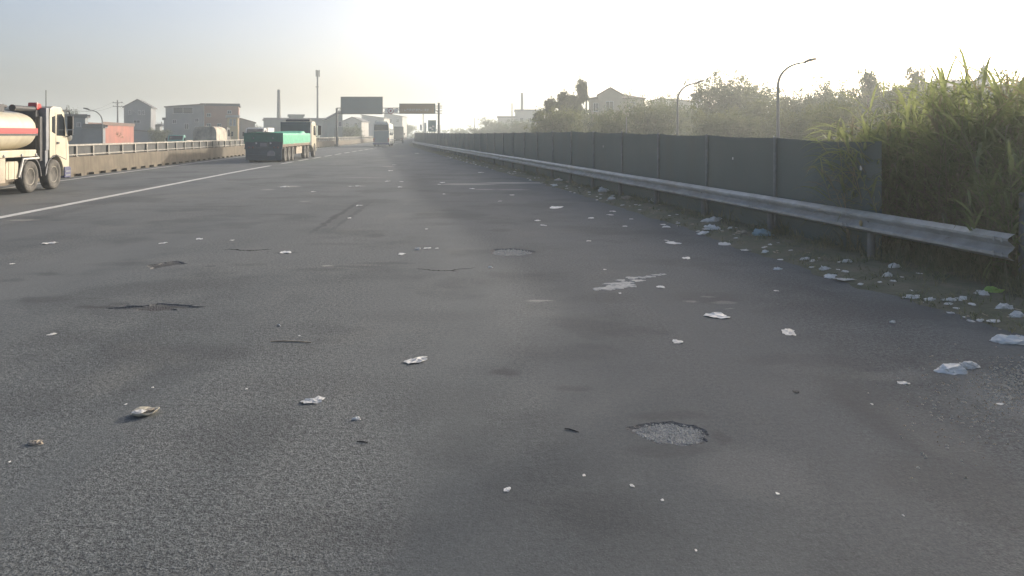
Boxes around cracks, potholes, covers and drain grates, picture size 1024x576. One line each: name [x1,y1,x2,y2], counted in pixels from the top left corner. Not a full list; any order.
pothole [146,261,187,269]
pothole [108,303,202,311]
pothole [490,248,536,256]
pothole [625,421,710,446]
